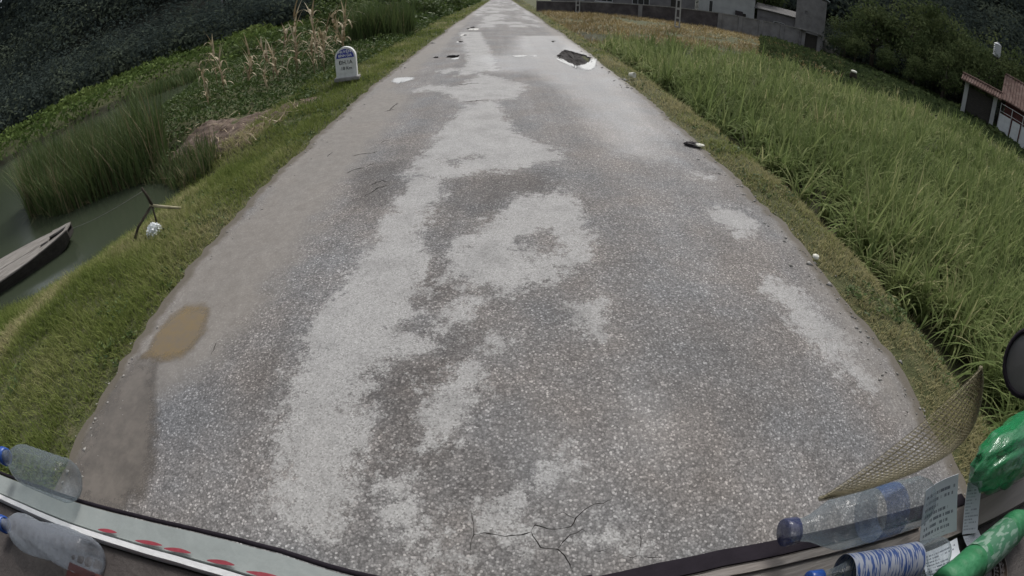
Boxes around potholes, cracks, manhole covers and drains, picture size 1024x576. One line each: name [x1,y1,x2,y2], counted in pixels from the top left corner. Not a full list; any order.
crack [470,500,609,572]
pothole [557,50,591,66]
crack [348,140,390,196]
